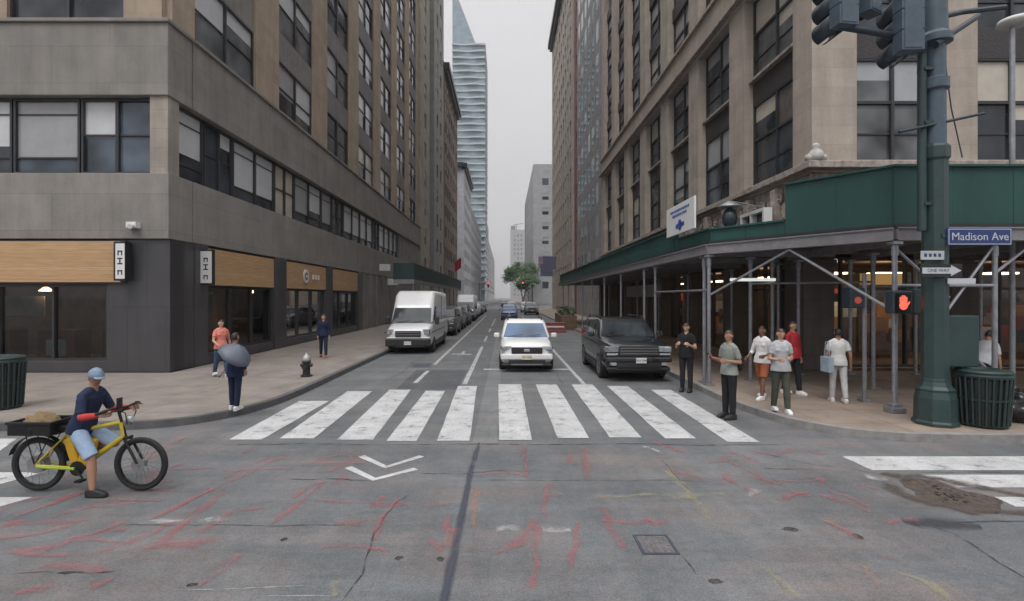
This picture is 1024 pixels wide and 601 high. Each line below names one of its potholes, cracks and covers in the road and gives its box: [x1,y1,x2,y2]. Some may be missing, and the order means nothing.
crack [912,522,1023,577]
crack [349,496,406,591]
manhole cover [633,534,680,555]
